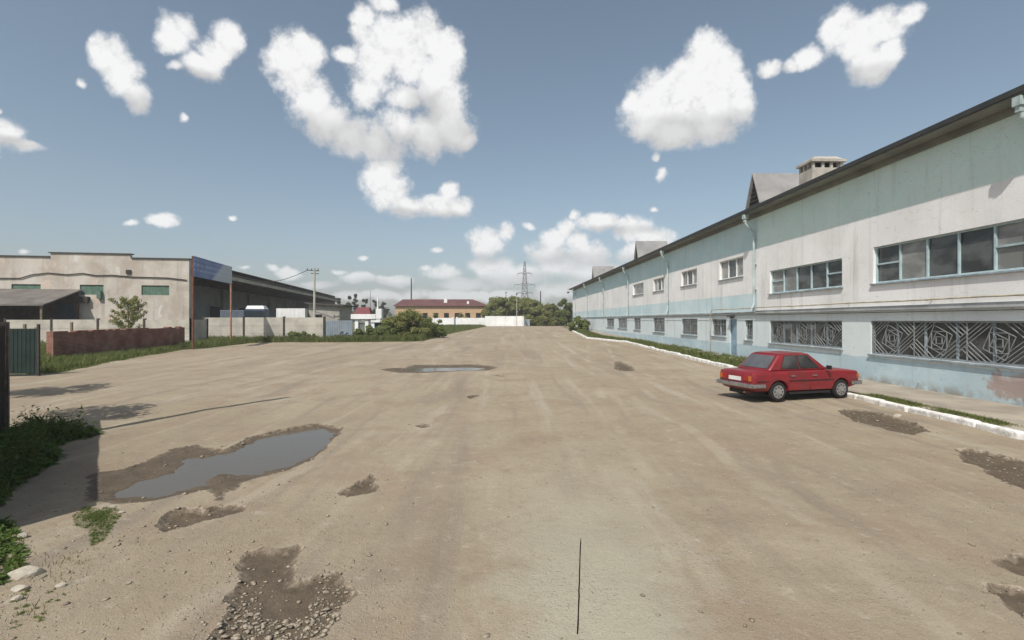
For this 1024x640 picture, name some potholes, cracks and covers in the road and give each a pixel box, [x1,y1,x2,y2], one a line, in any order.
pothole [837,406,938,435]
pothole [380,364,498,373]
pothole [324,471,389,504]
pothole [64,423,344,504]
pothole [199,539,377,640]
pothole [614,361,635,371]
pothole [130,502,256,542]
pothole [953,447,1024,494]
